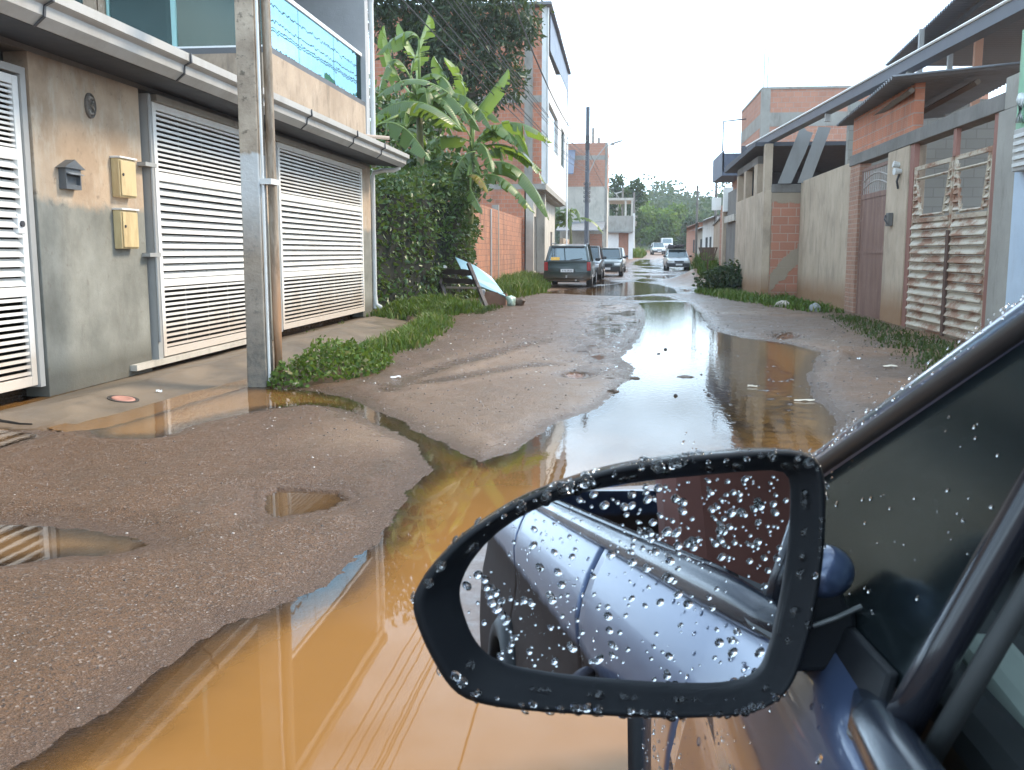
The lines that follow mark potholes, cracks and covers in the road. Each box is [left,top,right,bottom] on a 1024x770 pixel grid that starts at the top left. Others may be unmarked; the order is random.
pothole [251,484,361,522]
pothole [774,330,800,341]
manhole cover [107,395,139,403]
